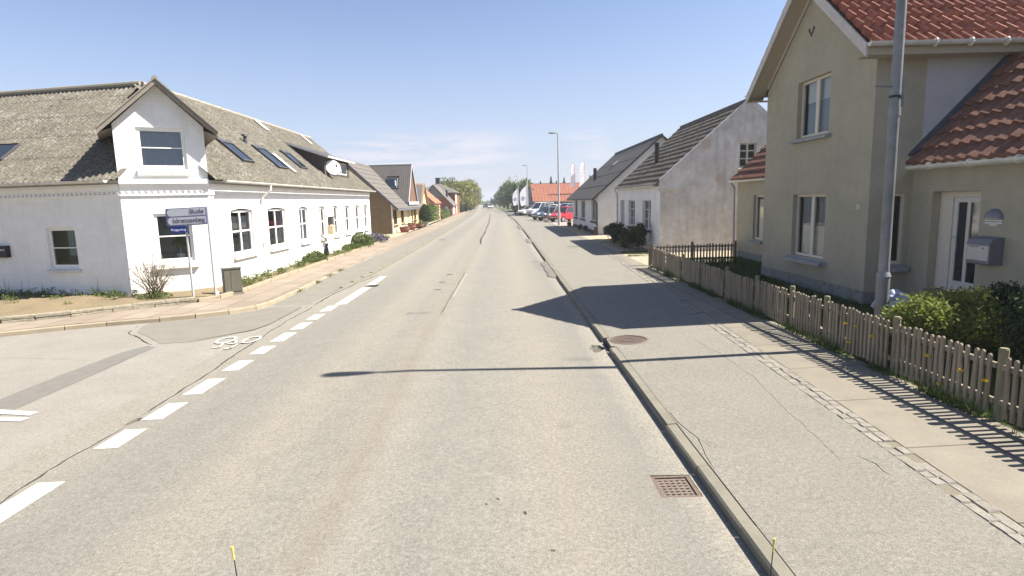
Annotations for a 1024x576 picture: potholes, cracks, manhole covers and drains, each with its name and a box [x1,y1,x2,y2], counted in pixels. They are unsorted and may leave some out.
manhole cover [609,335,649,345]
drain grate [650,475,703,498]
crack [669,412,713,467]
